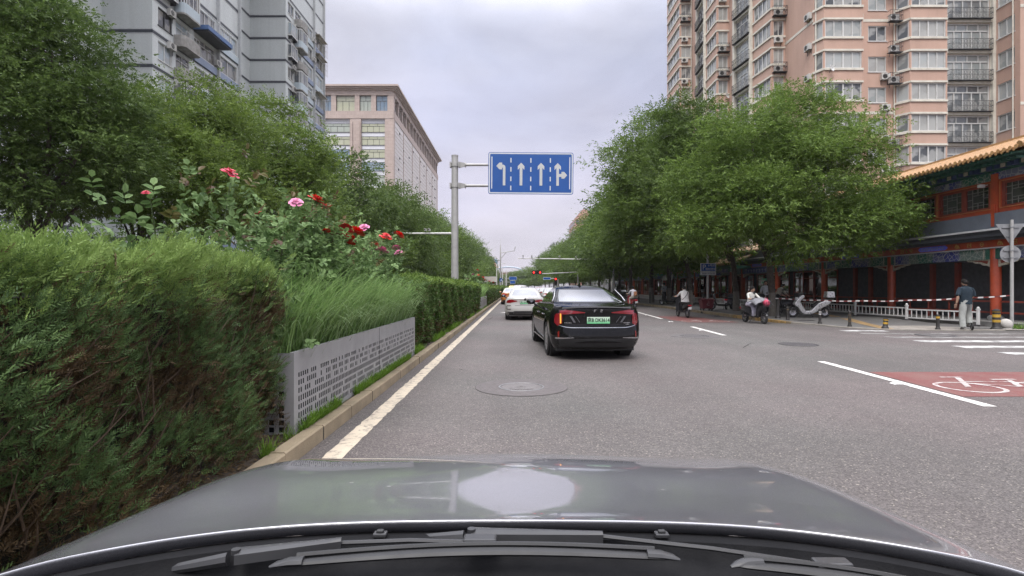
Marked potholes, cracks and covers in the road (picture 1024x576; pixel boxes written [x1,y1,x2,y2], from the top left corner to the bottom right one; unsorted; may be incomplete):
manhole cover [475,379,568,396]
